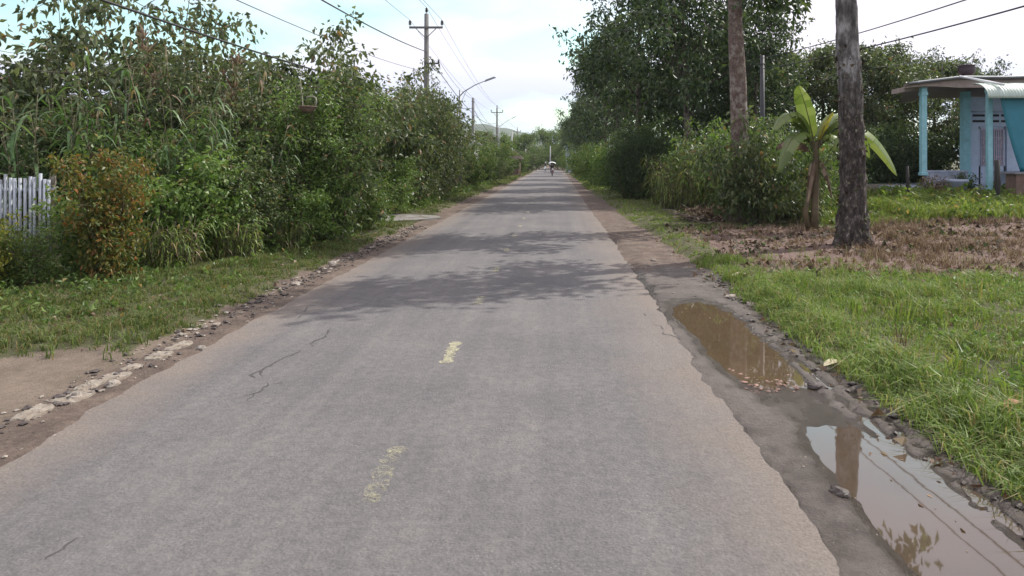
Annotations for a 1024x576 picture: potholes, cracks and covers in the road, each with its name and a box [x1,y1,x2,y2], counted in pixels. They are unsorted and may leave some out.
crack [247,329,329,400]
